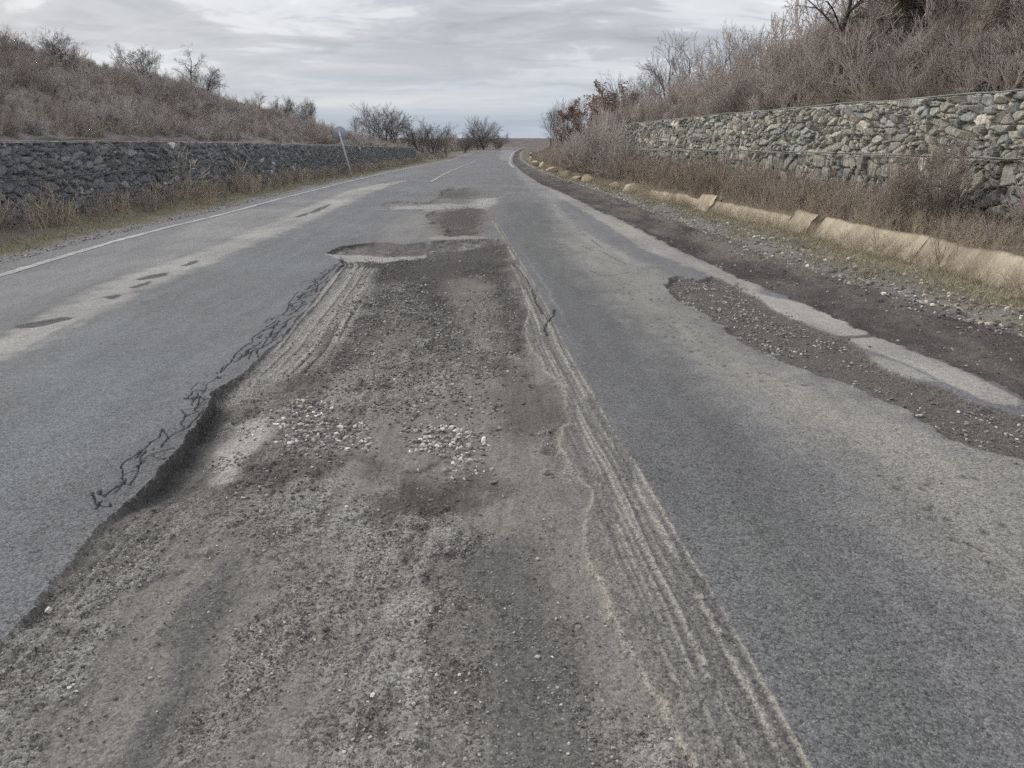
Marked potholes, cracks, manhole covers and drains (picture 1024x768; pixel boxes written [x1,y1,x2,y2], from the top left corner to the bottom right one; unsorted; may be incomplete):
crack [91,388,204,507]
crack [512,263,556,337]
crack [220,265,338,373]
pothole [0,238,698,768]
pothole [664,276,1024,460]
